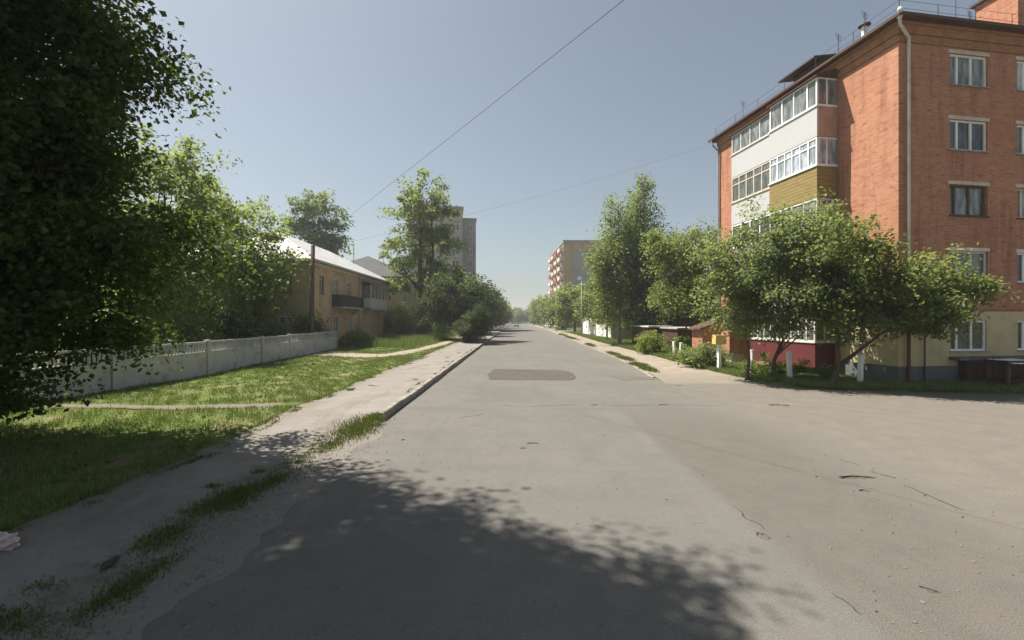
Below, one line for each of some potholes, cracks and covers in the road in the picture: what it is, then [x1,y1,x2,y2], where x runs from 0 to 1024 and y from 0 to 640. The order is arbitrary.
crack [840,459,962,510]
